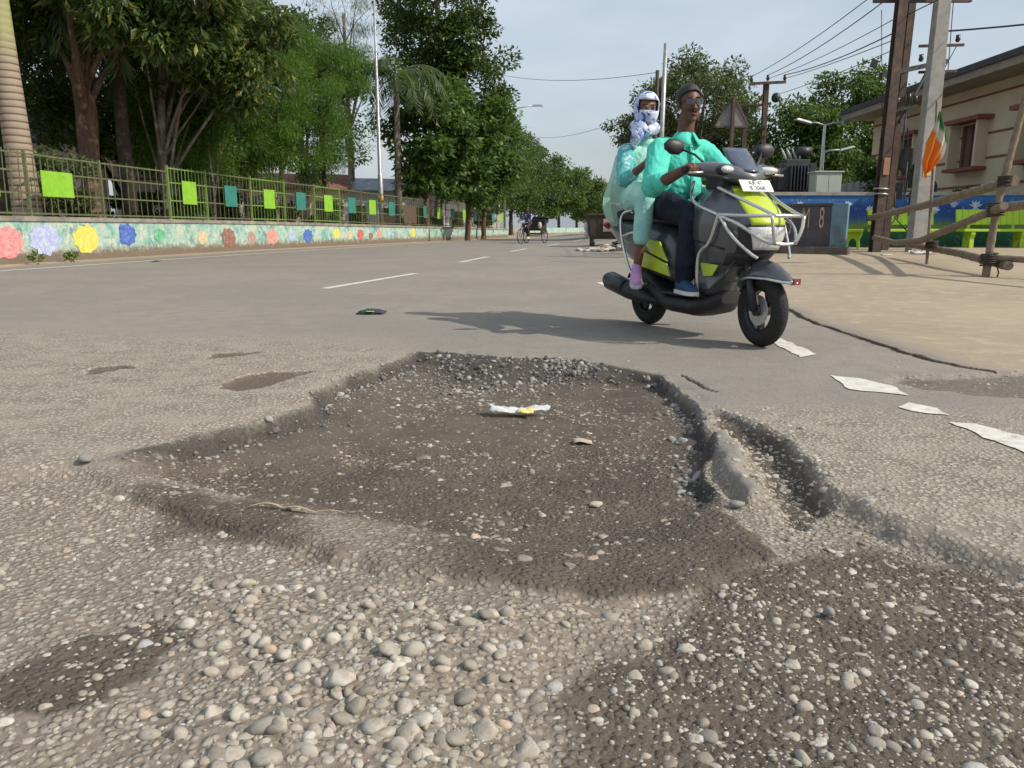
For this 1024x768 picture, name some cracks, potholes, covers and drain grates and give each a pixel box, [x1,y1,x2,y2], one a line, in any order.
crack [789,309,997,374]
pothole [67,349,785,609]
crack [678,374,718,392]
pothole [708,408,839,532]
pothole [879,369,1024,399]
